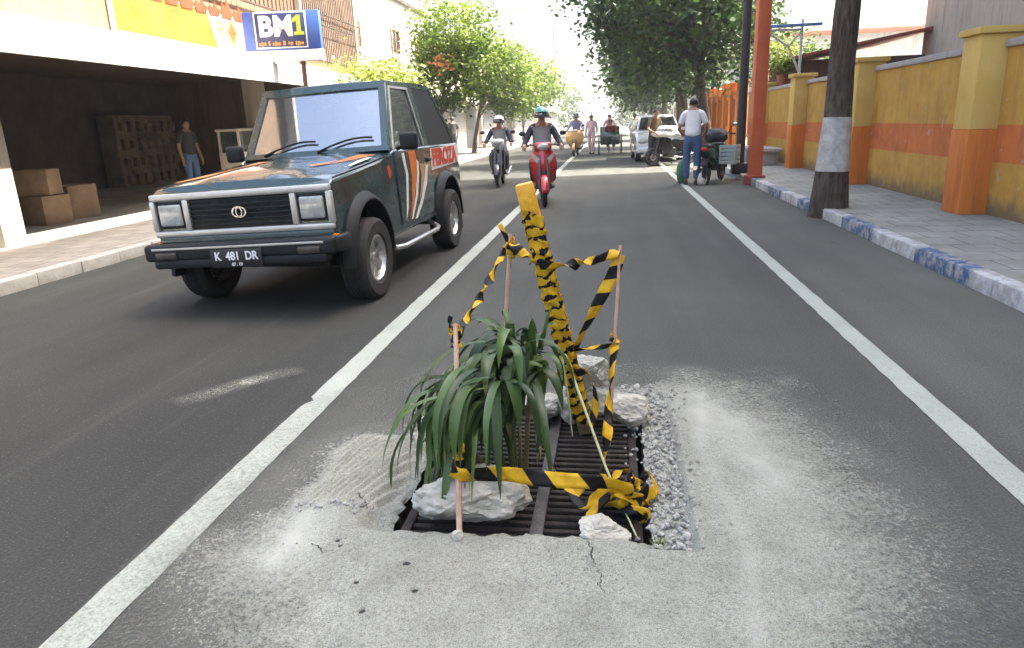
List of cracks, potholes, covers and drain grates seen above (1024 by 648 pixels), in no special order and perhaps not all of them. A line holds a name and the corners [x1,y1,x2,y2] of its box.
drain grate [401,416,644,543]
